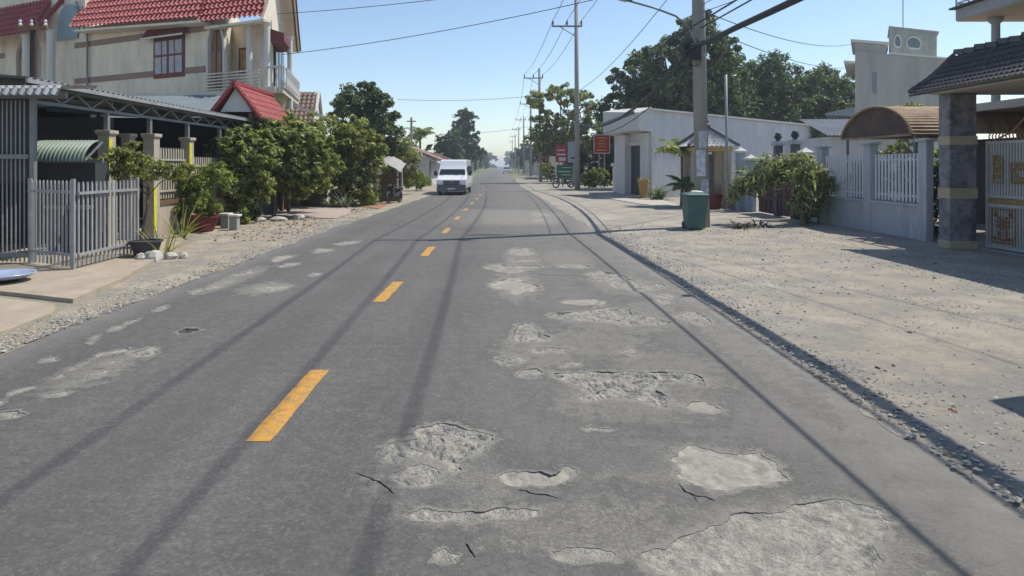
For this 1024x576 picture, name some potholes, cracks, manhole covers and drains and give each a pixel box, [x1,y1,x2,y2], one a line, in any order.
crack [357,473,394,494]
pothole [431,548,459,565]
pothole [406,507,539,523]
pothole [516,368,543,378]
pothole [509,323,550,342]
crack [679,484,715,501]
pothole [670,445,787,491]
pothole [0,410,26,419]
pothole [640,499,890,576]
pothole [95,348,129,357]
pothole [489,277,541,295]
pothole [499,466,578,486]
